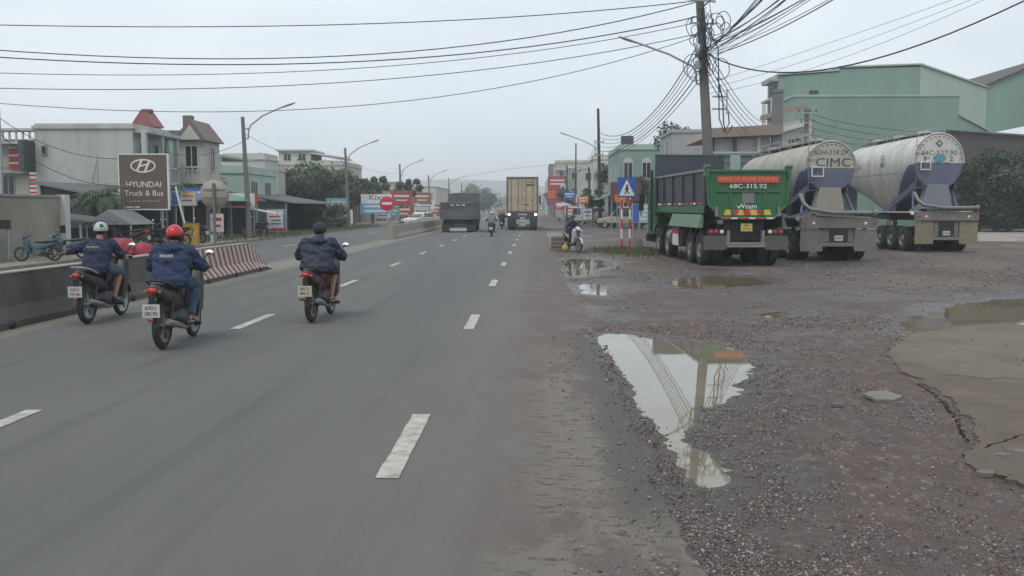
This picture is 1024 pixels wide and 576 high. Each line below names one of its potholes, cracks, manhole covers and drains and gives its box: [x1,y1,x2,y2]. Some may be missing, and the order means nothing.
pothole [664,275,786,289]
pothole [558,258,616,277]
pothole [571,282,624,297]
pothole [890,296,1024,334]
crack [916,375,1020,448]
pothole [592,333,758,489]
pothole [743,309,808,320]
